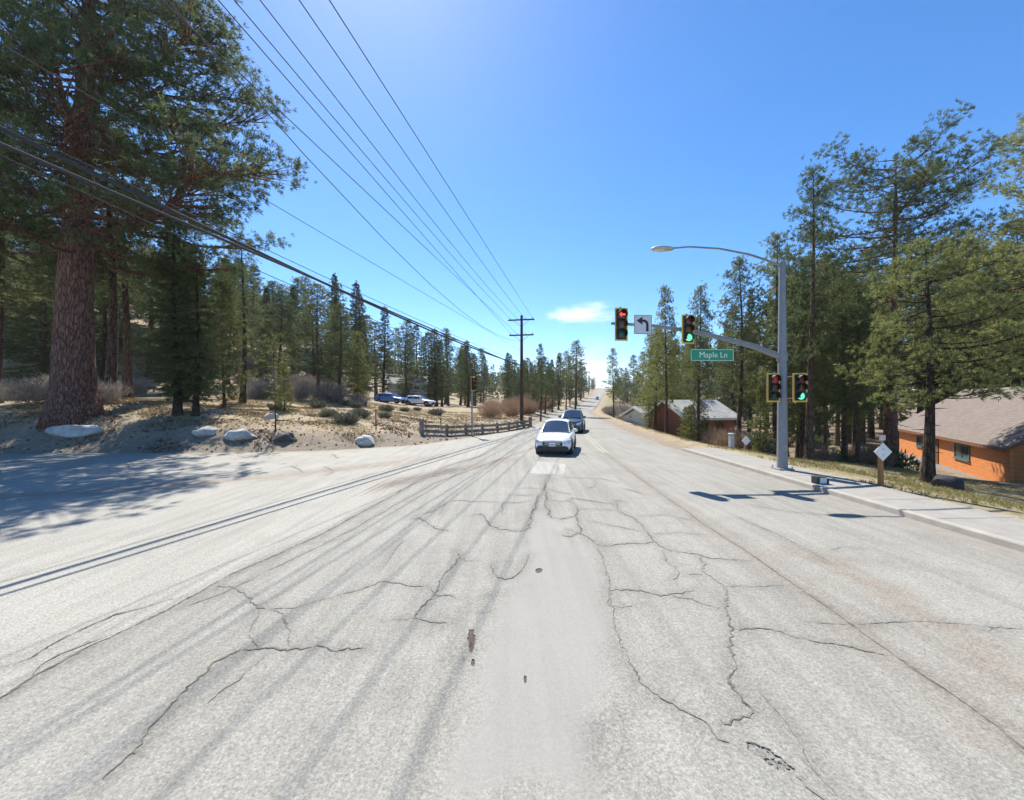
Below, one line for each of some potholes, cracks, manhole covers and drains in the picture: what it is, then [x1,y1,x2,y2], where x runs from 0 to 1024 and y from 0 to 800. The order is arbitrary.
pothole [467,629,476,653]
crack [803,620,1024,631]
crack [102,586,368,779]
crack [414,476,884,800]
crack [340,543,470,623]
pothole [746,742,795,774]
